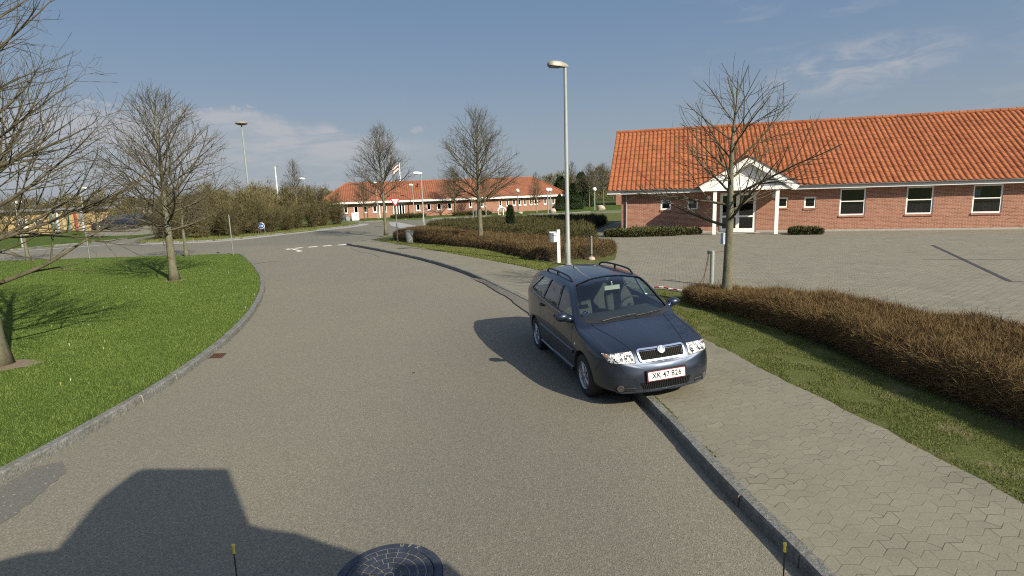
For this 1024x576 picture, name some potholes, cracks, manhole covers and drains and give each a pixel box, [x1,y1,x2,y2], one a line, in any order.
manhole cover [337,543,443,576]
